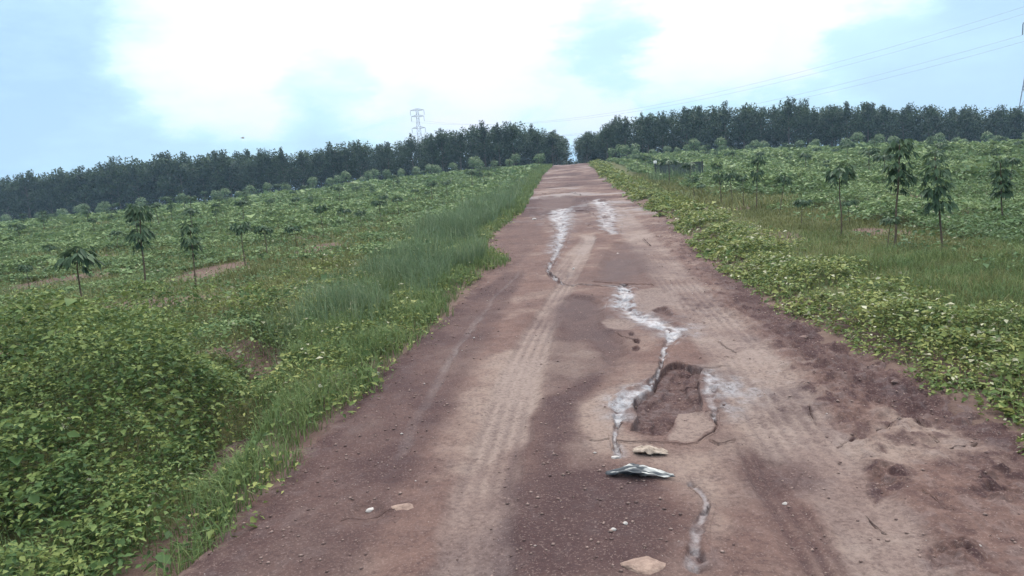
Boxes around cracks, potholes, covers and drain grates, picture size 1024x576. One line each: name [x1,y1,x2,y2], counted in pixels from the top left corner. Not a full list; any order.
crack [589,342,737,446]
pothole [628,362,704,437]
